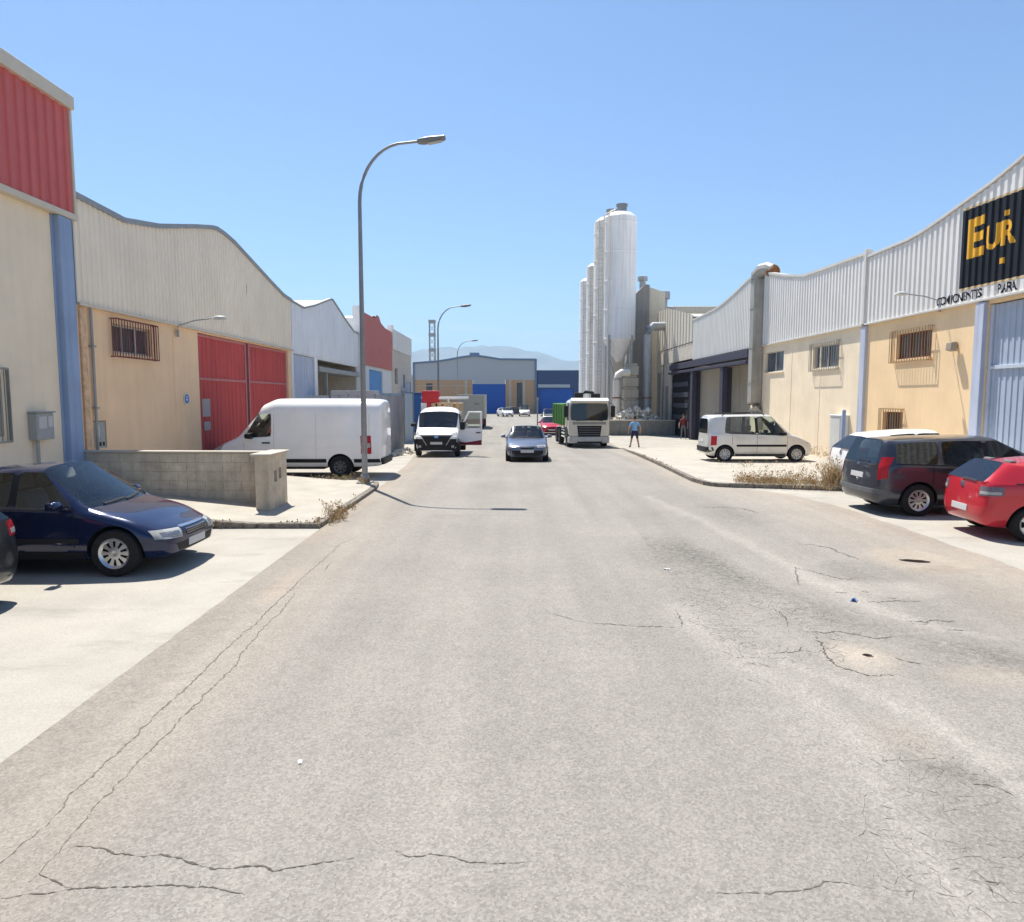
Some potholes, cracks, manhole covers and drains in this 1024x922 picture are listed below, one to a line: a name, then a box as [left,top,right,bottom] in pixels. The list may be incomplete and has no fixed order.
crack [395,850,526,864]
crack [708,880,874,894]
crack [640,534,921,683]
crack [859,734,1024,922]
crack [0,536,358,898]
crack [549,612,683,627]
